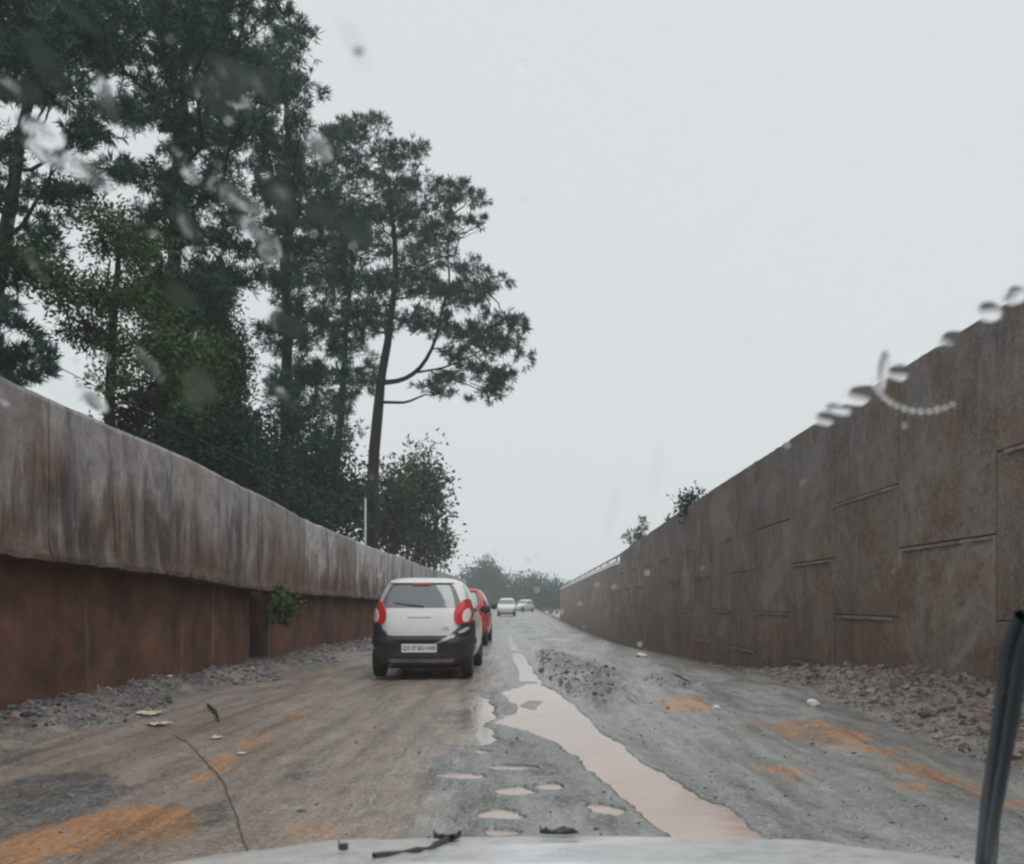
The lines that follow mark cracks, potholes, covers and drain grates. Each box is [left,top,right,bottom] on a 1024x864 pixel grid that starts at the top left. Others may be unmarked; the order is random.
pothole [481,827,523,836]
pothole [493,784,538,795]
pothole [434,770,487,779]
pothole [473,806,527,818]
pothole [582,802,629,816]
pothole [528,782,564,792]
crack [175,735,248,851]
